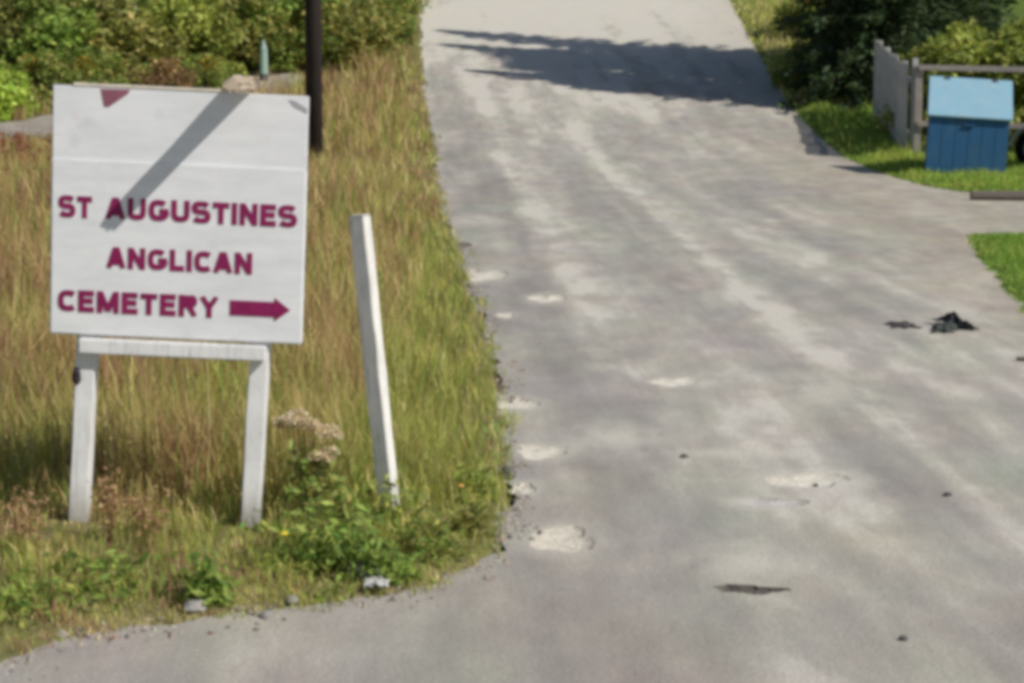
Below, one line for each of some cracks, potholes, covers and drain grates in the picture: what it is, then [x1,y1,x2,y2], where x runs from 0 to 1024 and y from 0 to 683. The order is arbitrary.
pothole [712,584,791,595]
